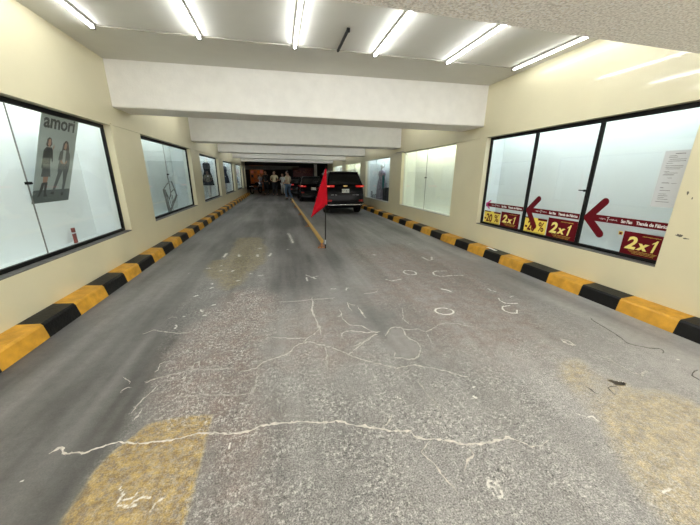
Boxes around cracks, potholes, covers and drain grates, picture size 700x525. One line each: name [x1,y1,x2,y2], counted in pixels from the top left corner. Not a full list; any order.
crack [591,318,664,353]
crack [49,298,549,491]
